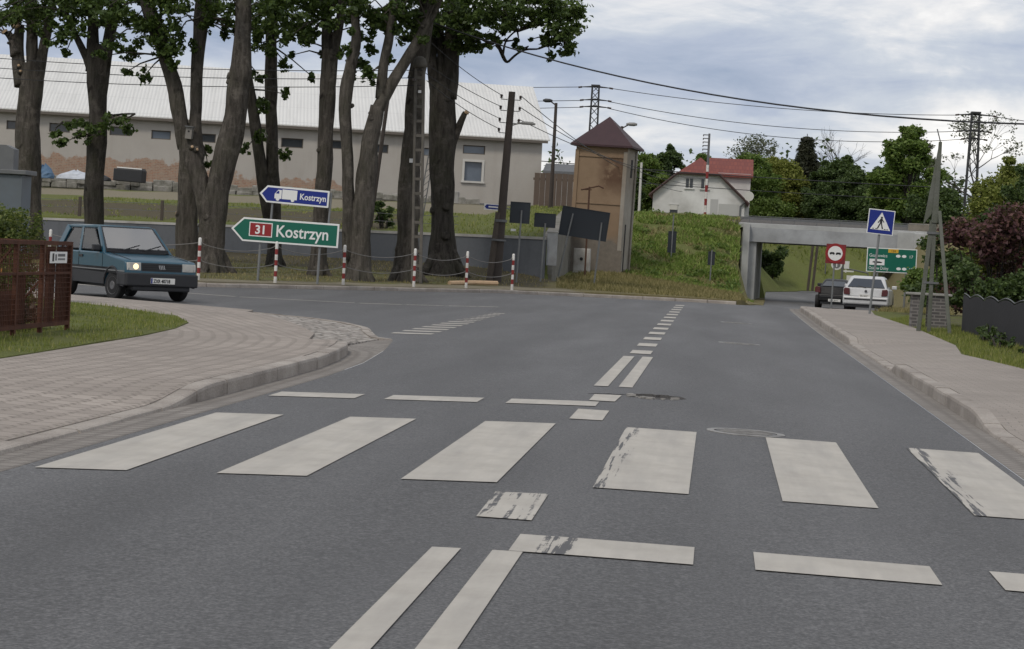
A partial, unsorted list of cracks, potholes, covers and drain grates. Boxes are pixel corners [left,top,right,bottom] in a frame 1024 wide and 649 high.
manhole cover [706,428,785,437]
